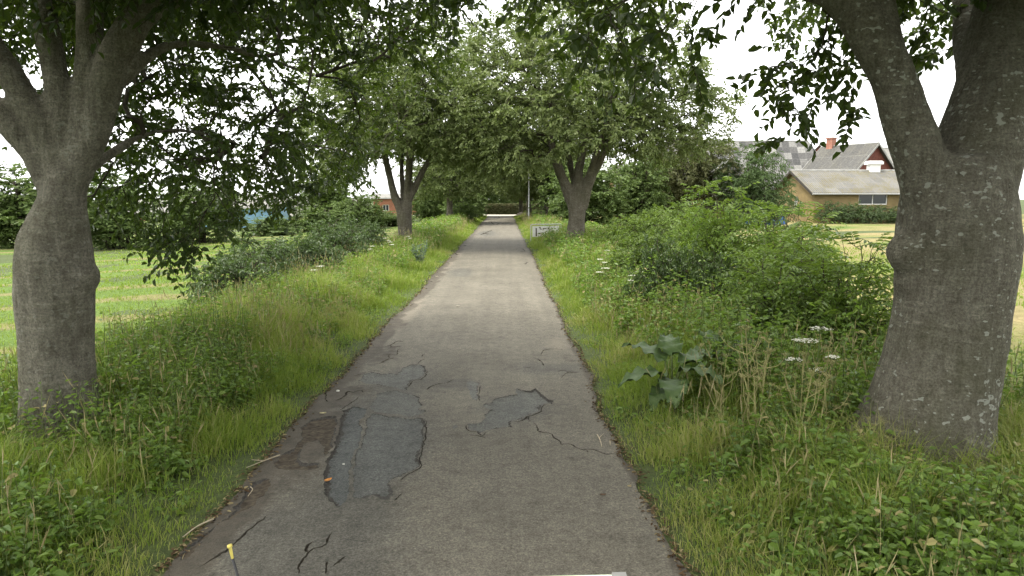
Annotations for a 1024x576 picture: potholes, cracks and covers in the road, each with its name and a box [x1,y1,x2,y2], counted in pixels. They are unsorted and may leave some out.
crack [465,405,616,455]
crack [201,516,266,566]
crack [297,532,345,573]
crack [325,341,403,410]
